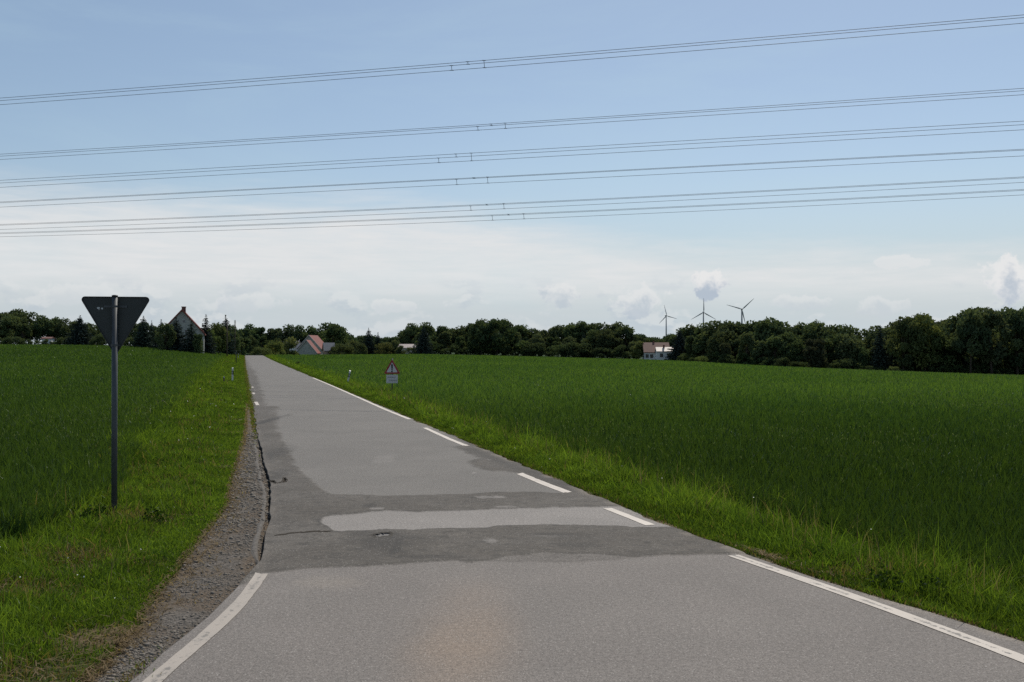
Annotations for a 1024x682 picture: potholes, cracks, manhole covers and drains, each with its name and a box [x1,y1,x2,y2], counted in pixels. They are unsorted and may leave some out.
crack [250,438,333,564]
